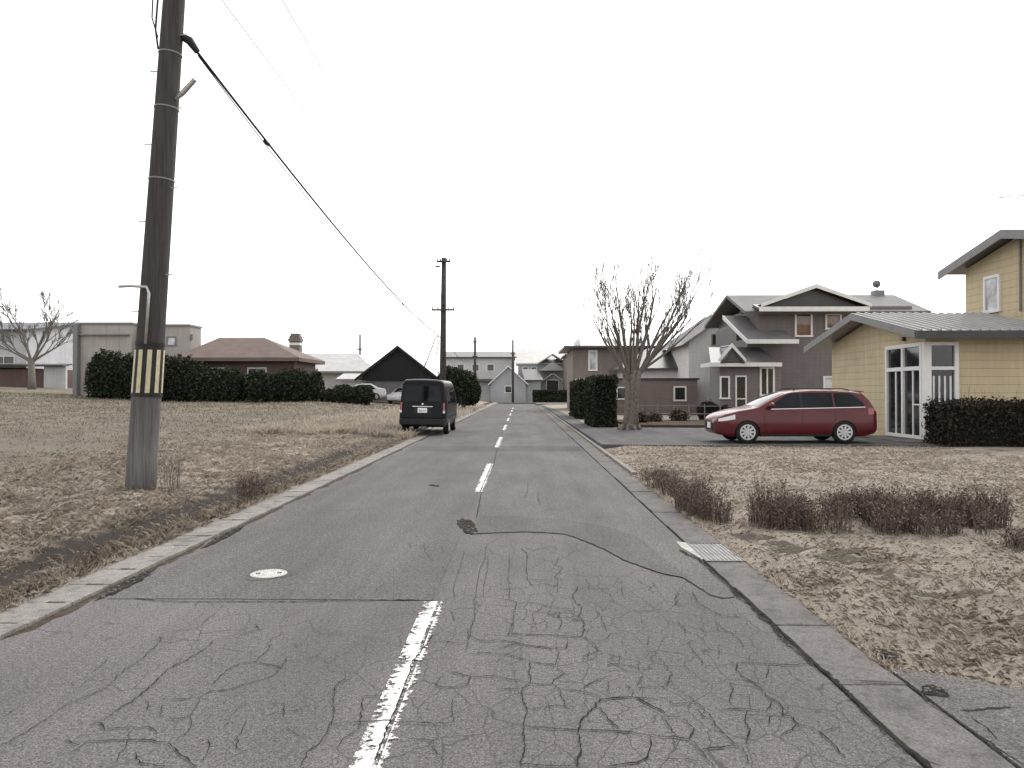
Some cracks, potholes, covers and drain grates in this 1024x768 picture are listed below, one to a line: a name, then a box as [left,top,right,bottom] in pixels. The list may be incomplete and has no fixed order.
crack [1,531,1023,768]
drain grate [676,542,746,564]
manhole cover [246,568,297,581]
pothole [920,684,950,697]
pothole [457,517,478,534]
